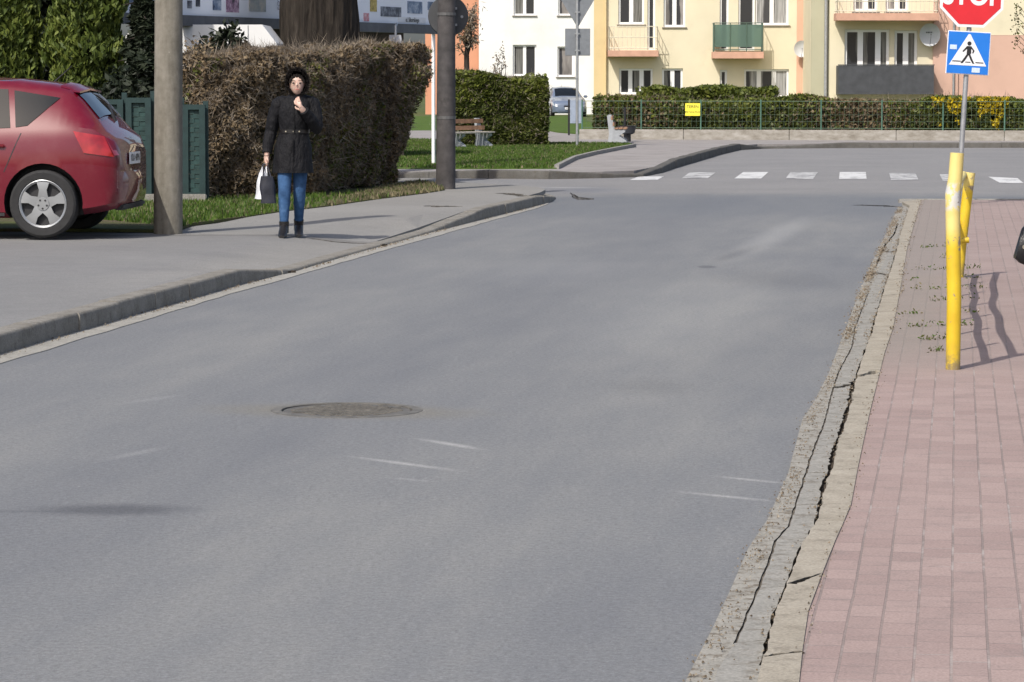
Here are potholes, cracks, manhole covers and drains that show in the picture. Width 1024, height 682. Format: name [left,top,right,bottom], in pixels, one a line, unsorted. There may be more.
crack [734,205,898,659]
manhole cover [271,402,423,418]
